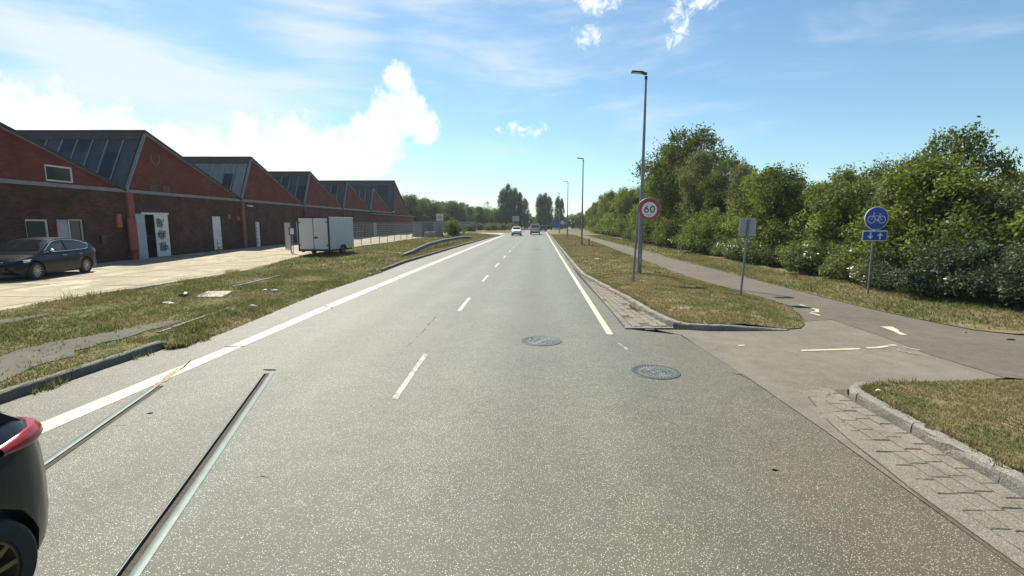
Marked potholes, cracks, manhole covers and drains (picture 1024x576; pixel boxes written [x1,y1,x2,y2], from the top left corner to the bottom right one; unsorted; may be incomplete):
manhole cover [521,336,562,346]
manhole cover [631,364,681,380]
